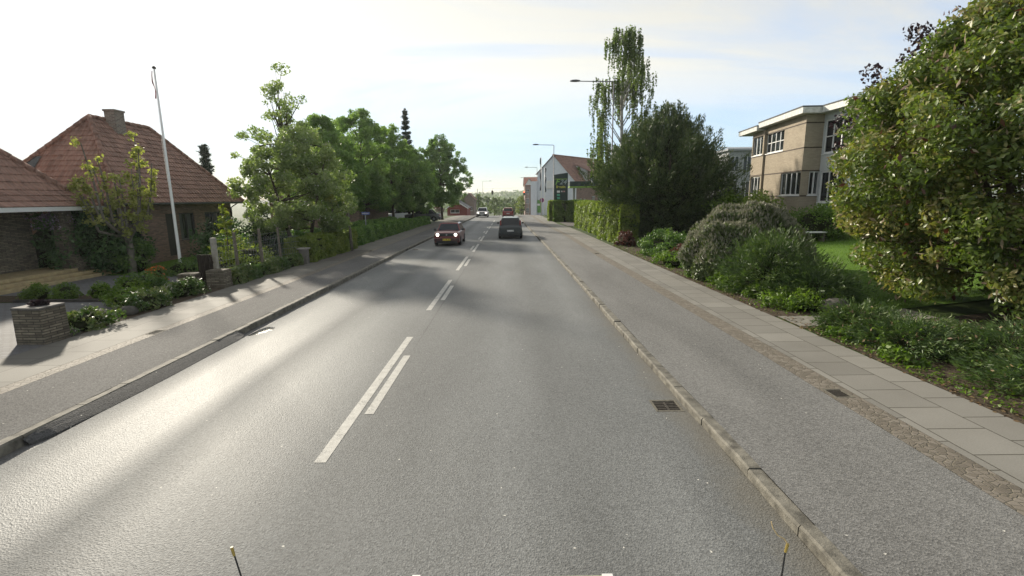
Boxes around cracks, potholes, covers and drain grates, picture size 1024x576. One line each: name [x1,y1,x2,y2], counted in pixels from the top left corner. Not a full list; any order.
drain grate [649,400,684,412]
